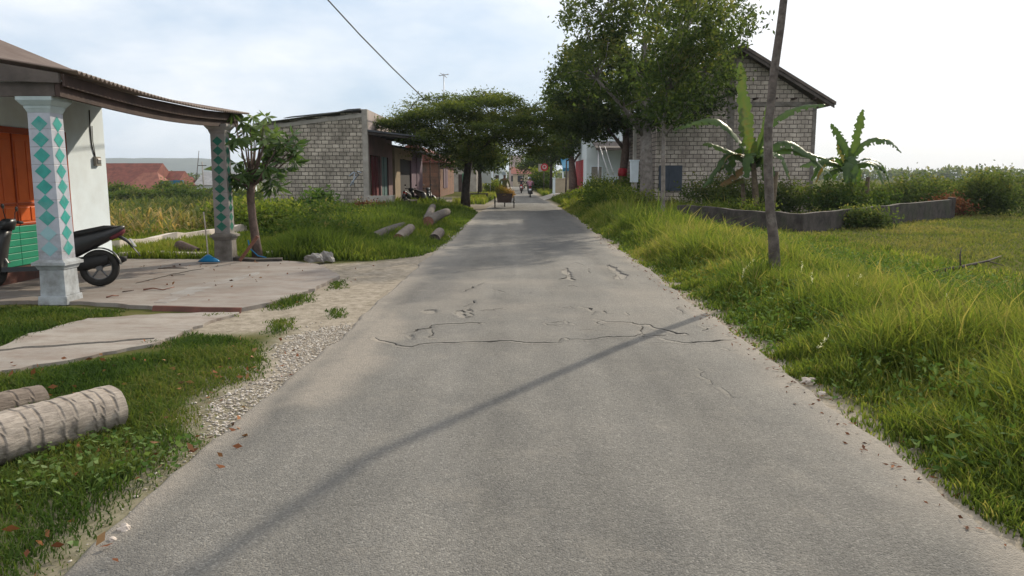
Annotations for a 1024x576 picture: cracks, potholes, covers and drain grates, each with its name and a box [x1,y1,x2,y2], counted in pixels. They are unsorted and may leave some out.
crack [368,283,737,351]
pothole [607,265,631,280]
pothole [449,309,476,319]
pothole [558,268,576,281]
crack [692,368,742,398]
